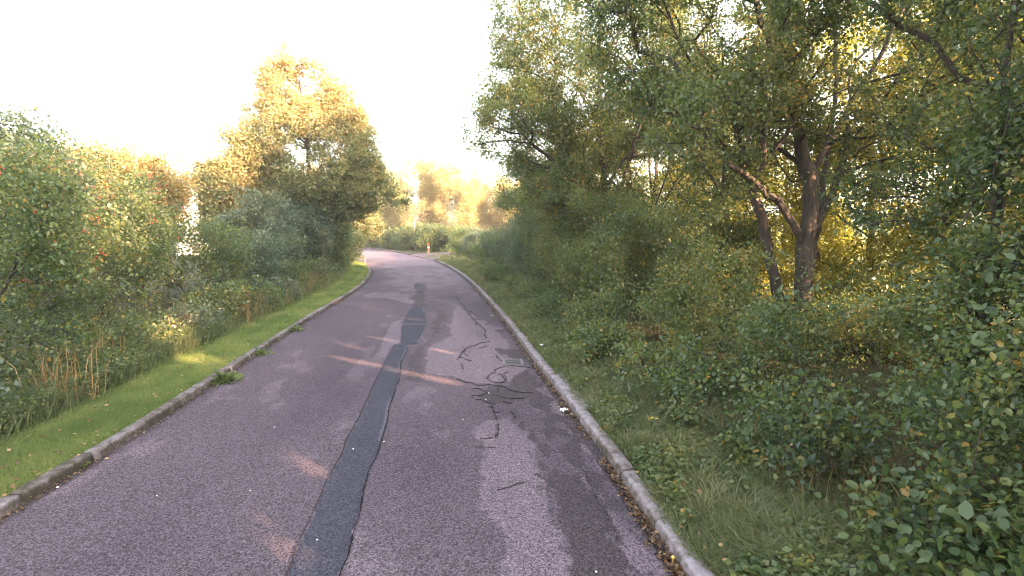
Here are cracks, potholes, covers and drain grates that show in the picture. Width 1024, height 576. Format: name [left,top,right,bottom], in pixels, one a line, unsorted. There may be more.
crack [457,297,535,448]
